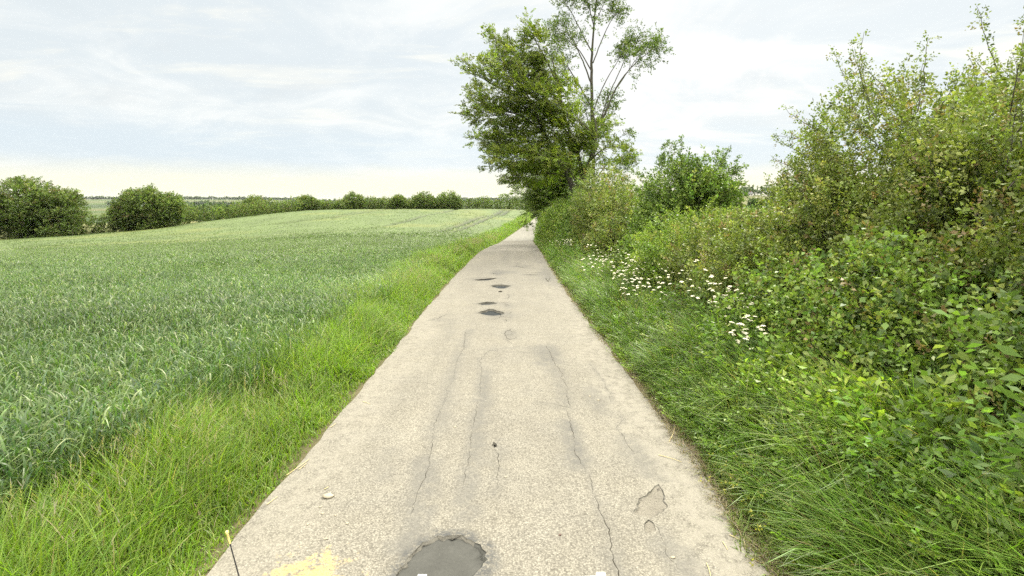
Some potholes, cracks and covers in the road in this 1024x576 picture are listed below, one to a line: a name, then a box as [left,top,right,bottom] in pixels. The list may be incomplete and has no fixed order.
pothole [633,484,668,518]
pothole [396,535,488,576]
crack [546,347,619,576]
crack [411,334,465,513]
pothole [644,519,656,534]
